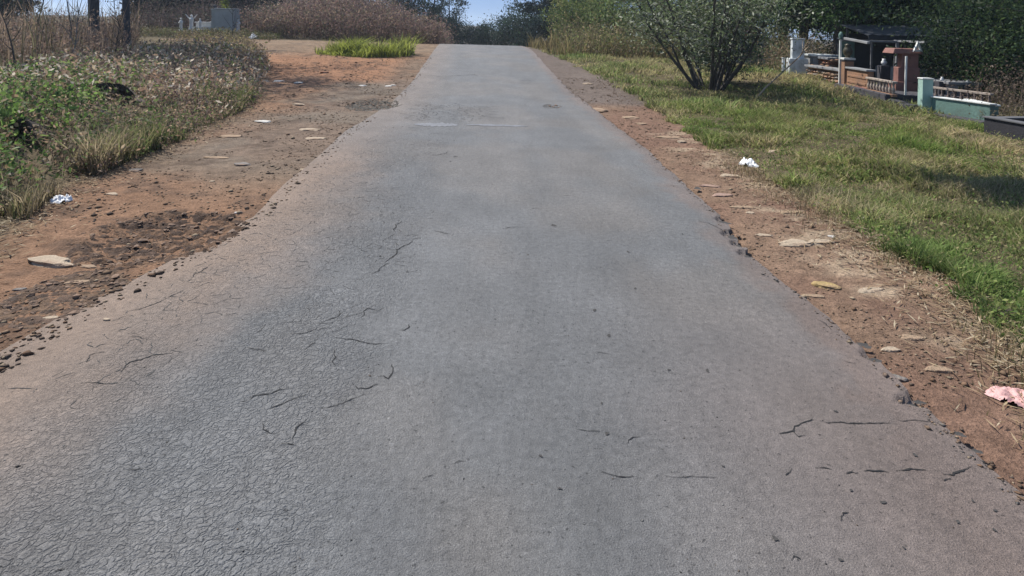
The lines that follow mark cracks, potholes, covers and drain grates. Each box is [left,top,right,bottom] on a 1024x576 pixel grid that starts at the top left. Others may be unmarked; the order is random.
crack [7,103,499,423]
crack [248,388,306,445]
crack [781,419,924,437]
